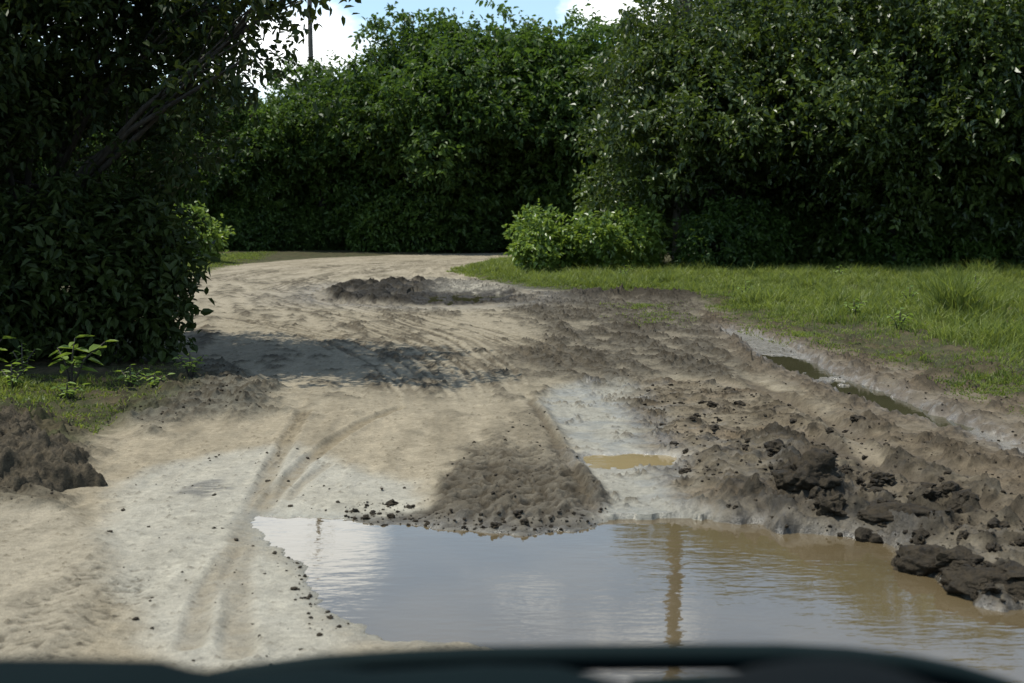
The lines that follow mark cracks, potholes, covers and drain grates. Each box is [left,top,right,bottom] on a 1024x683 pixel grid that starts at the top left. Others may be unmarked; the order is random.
pothole [237,497,1024,683]
pothole [578,443,690,469]
